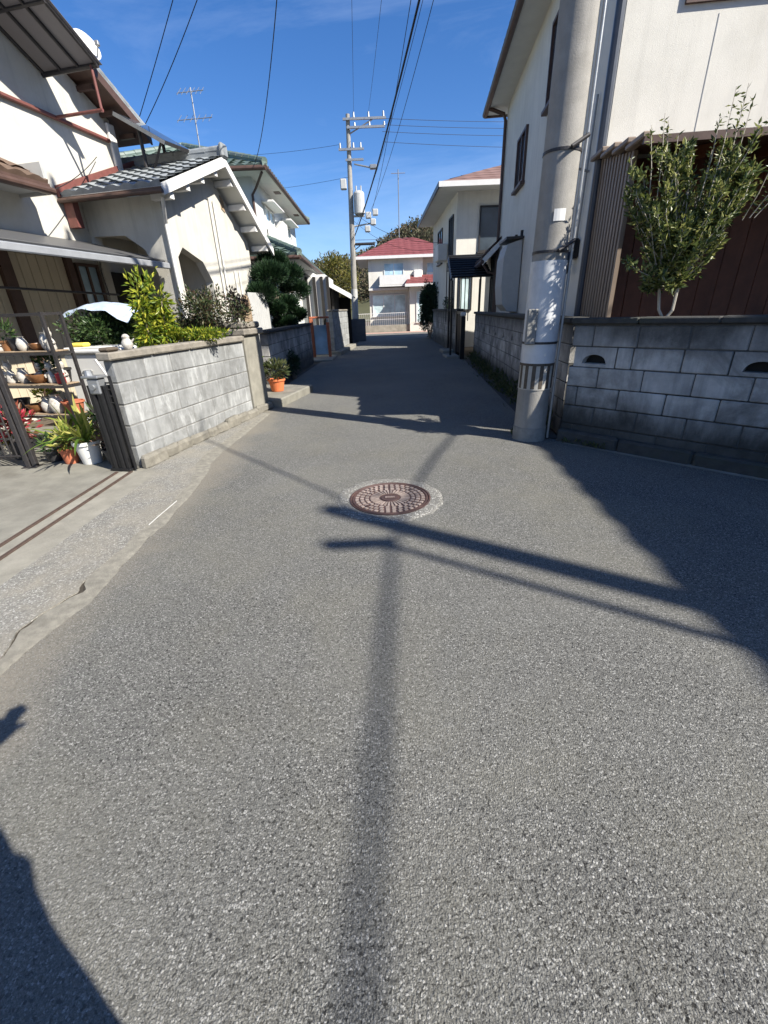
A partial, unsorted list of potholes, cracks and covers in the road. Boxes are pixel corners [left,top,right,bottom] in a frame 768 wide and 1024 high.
manhole cover [337,478,443,523]
crack [3,582,86,657]
